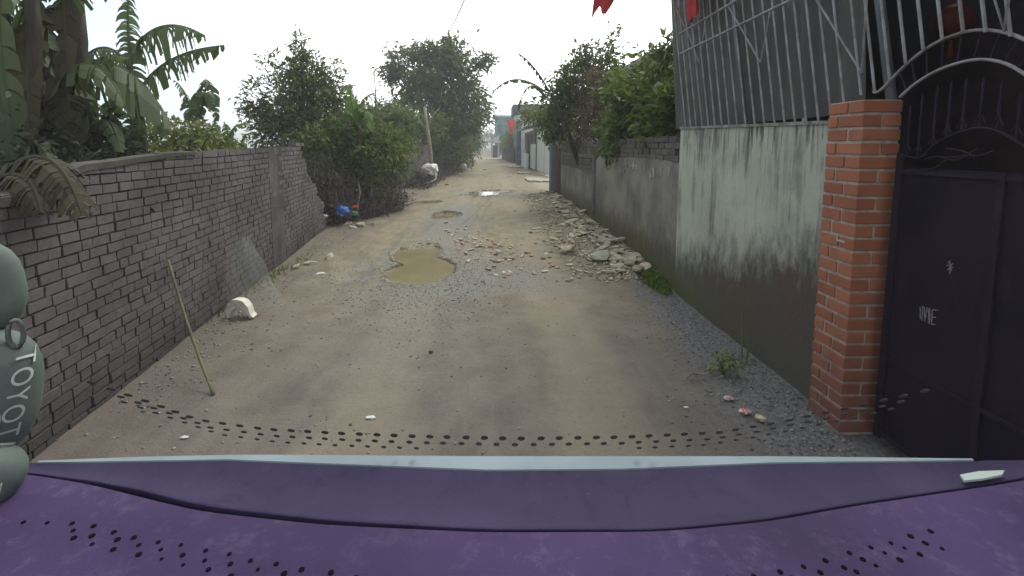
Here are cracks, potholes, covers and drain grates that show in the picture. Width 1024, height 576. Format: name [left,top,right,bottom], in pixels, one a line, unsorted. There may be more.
pothole [430,210,464,220]
pothole [378,241,461,288]
pothole [455,189,517,197]
